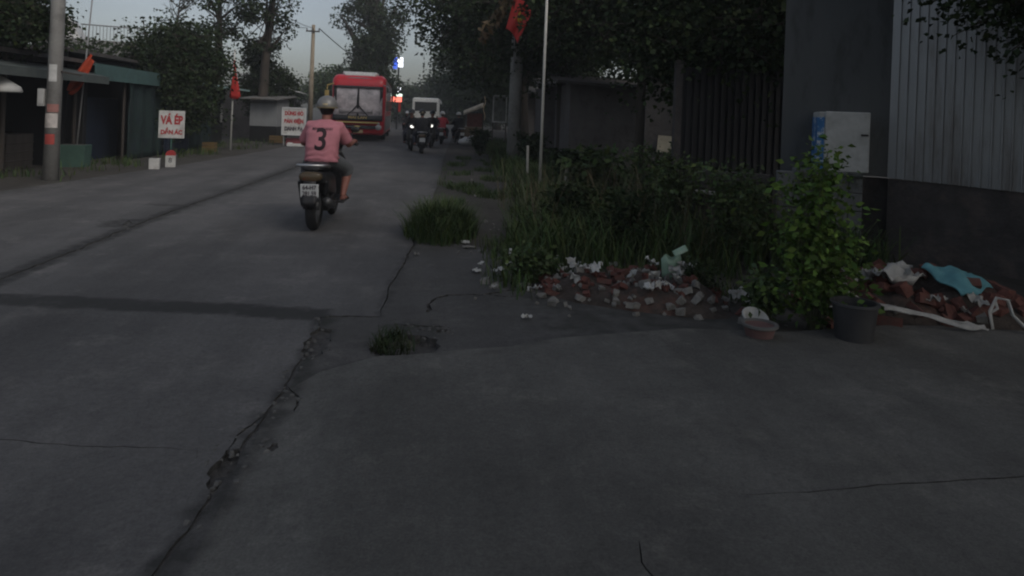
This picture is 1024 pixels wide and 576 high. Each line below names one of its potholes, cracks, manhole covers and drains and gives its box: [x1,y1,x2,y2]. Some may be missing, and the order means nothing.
crack [0,439,198,459]
crack [639,541,653,576]
crack [757,476,1024,495]
pothole [361,333,446,357]
crack [393,289,535,331]
